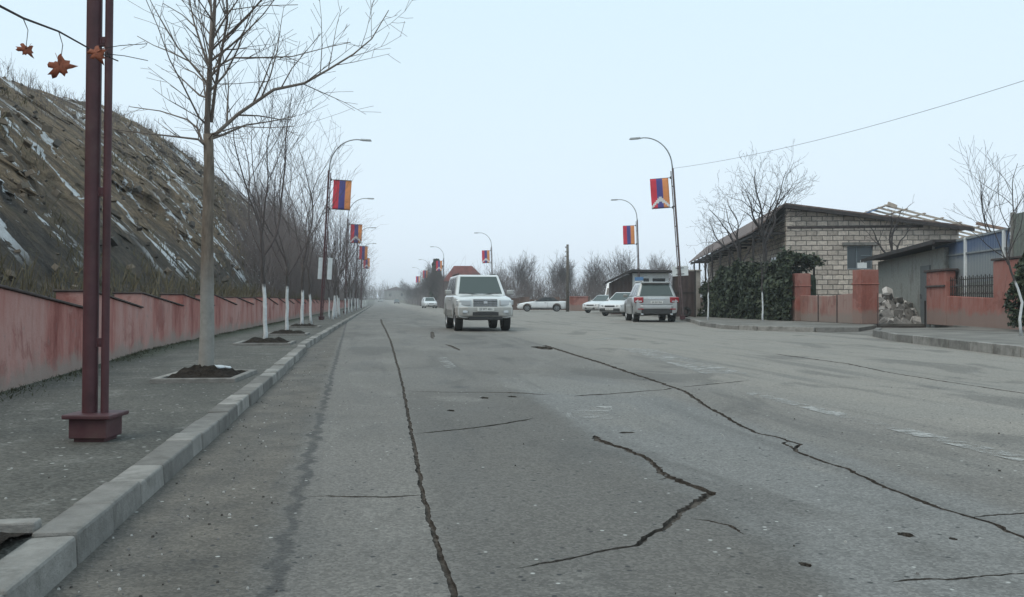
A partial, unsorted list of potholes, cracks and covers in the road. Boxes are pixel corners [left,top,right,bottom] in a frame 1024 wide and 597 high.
crack [329,320,1024,597]
